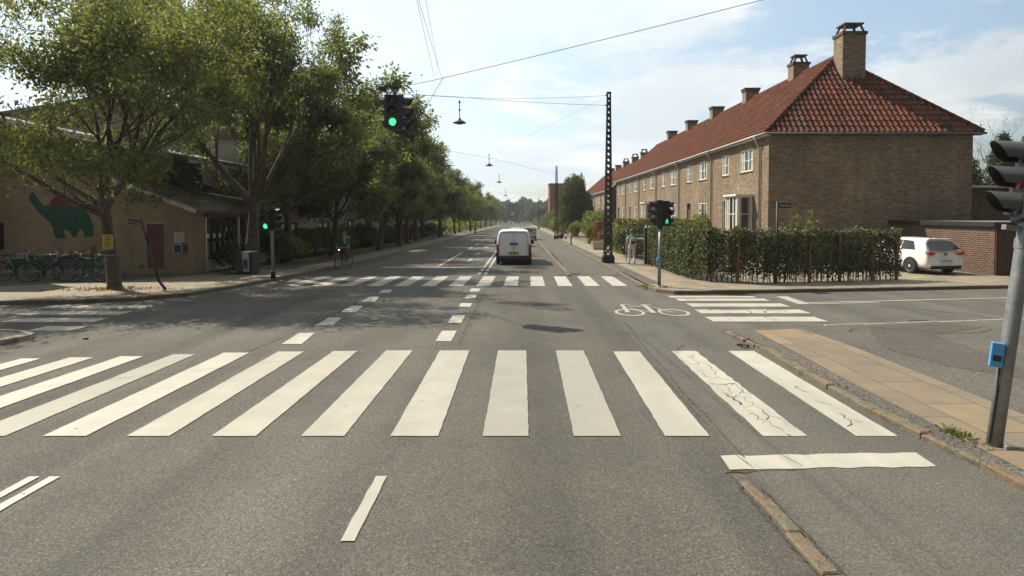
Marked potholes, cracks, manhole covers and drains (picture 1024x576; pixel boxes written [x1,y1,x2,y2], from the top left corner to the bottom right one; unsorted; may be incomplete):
crack [676,345,792,436]
